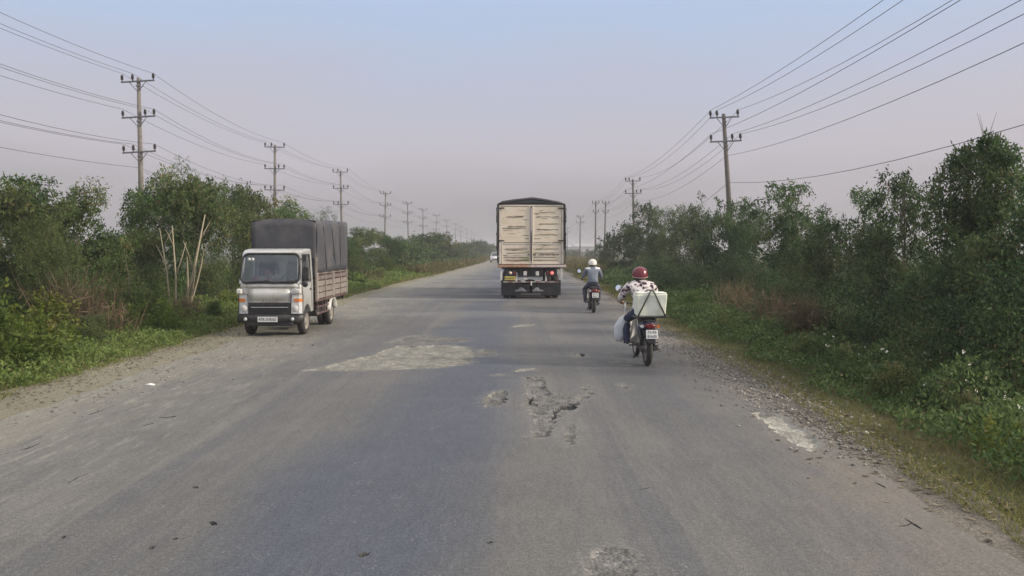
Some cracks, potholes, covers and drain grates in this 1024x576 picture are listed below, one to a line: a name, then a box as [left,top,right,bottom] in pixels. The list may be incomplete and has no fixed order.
pothole [522,376,596,438]
pothole [562,424,577,446]
pothole [481,390,509,407]
pothole [581,546,640,576]
